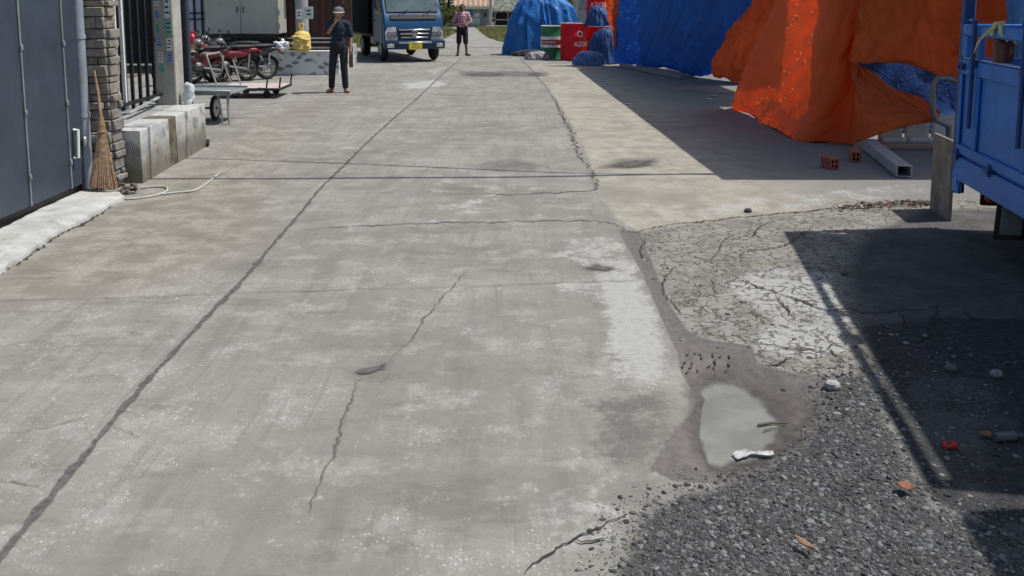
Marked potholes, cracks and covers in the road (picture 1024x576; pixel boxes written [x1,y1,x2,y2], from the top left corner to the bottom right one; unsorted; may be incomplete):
crack [310,377,362,511]
crack [305,219,625,232]
crack [631,202,942,368]
crack [525,514,626,573]
pothole [690,372,814,470]
crack [449,98,599,195]
